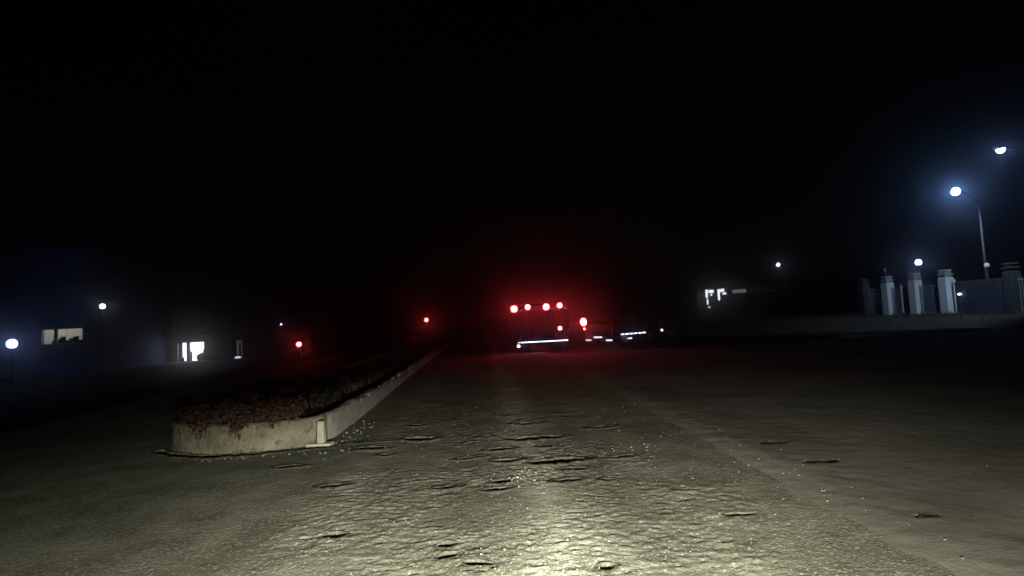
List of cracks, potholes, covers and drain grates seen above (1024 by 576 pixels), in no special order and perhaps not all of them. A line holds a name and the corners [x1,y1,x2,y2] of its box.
pothole [317,531,353,539]
pothole [503,434,574,443]
pothole [461,558,498,568]
pothole [522,456,598,468]
pothole [546,476,589,485]
pothole [427,484,469,492]
pothole [592,562,621,572]
pothole [476,485,520,494]
pothole [311,482,358,491]
pothole [397,435,447,443]
